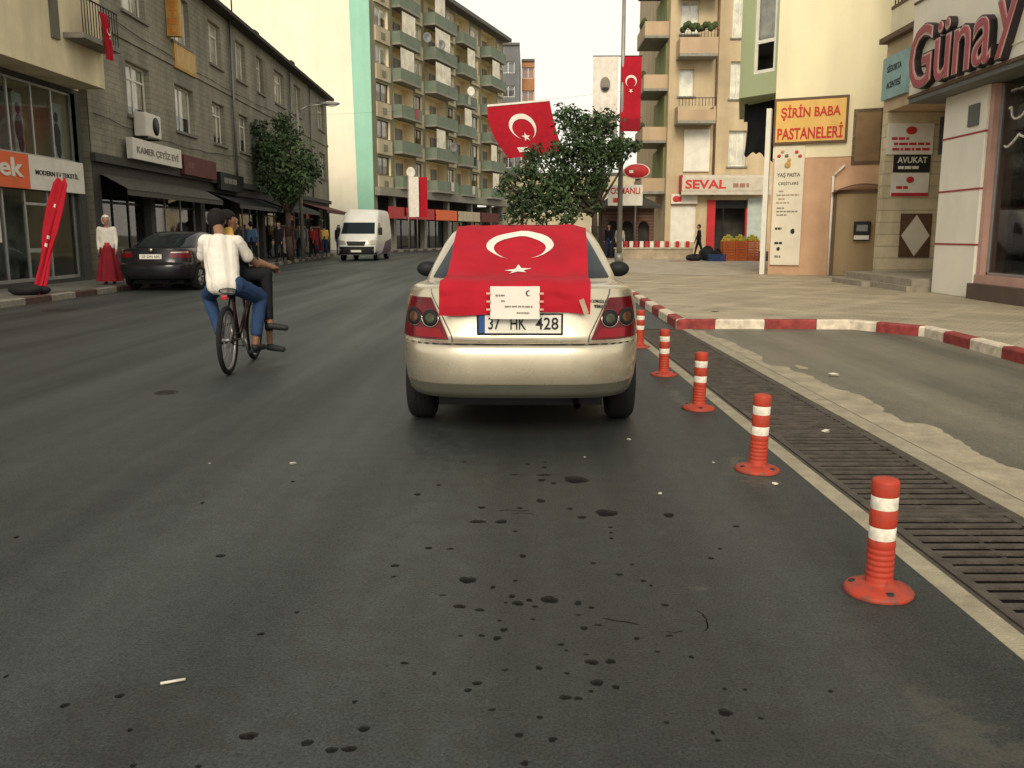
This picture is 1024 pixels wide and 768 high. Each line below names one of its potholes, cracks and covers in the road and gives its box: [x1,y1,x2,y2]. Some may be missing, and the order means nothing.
drain grate [644,329,697,340]
drain grate [708,386,862,432]
drain grate [897,512,1024,630]
crack [665,610,709,633]
drain grate [769,432,1006,513]
drain grate [647,339,731,358]
drain grate [671,358,781,387]
